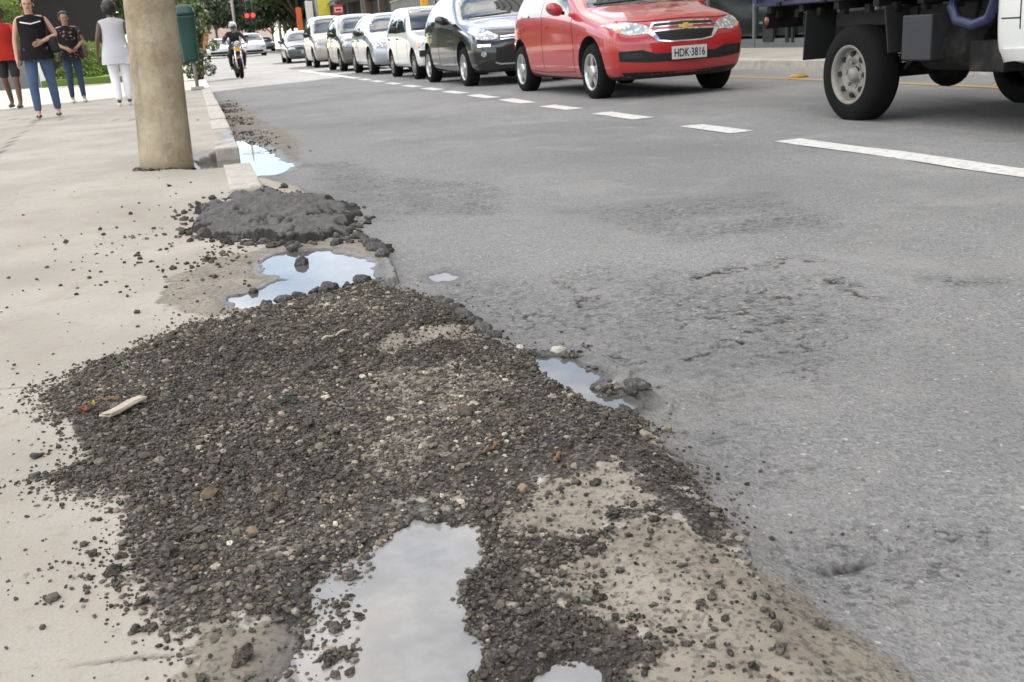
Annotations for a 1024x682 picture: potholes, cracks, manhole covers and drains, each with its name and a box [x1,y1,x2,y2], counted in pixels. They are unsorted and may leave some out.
pothole [278,516,484,682]
crack [690,257,871,299]
crack [648,289,833,378]
crack [511,285,645,367]
